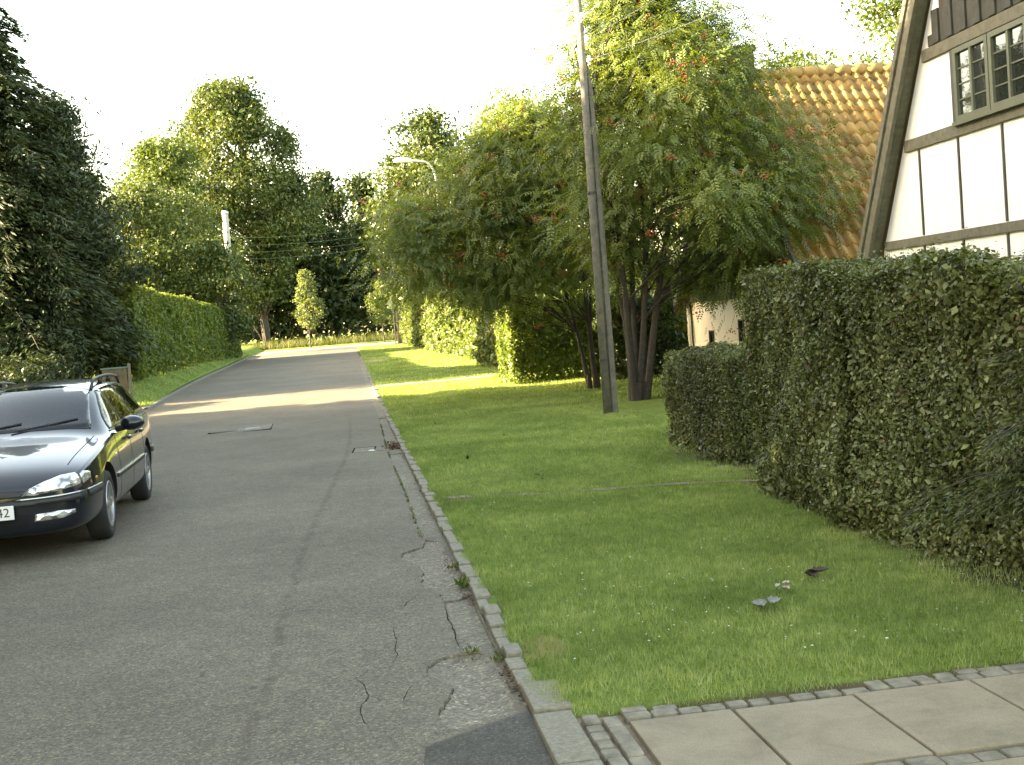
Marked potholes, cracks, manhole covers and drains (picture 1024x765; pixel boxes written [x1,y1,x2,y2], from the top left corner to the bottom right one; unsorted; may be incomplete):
manhole cover [208,424,273,434]
crack [355,669,381,731]
